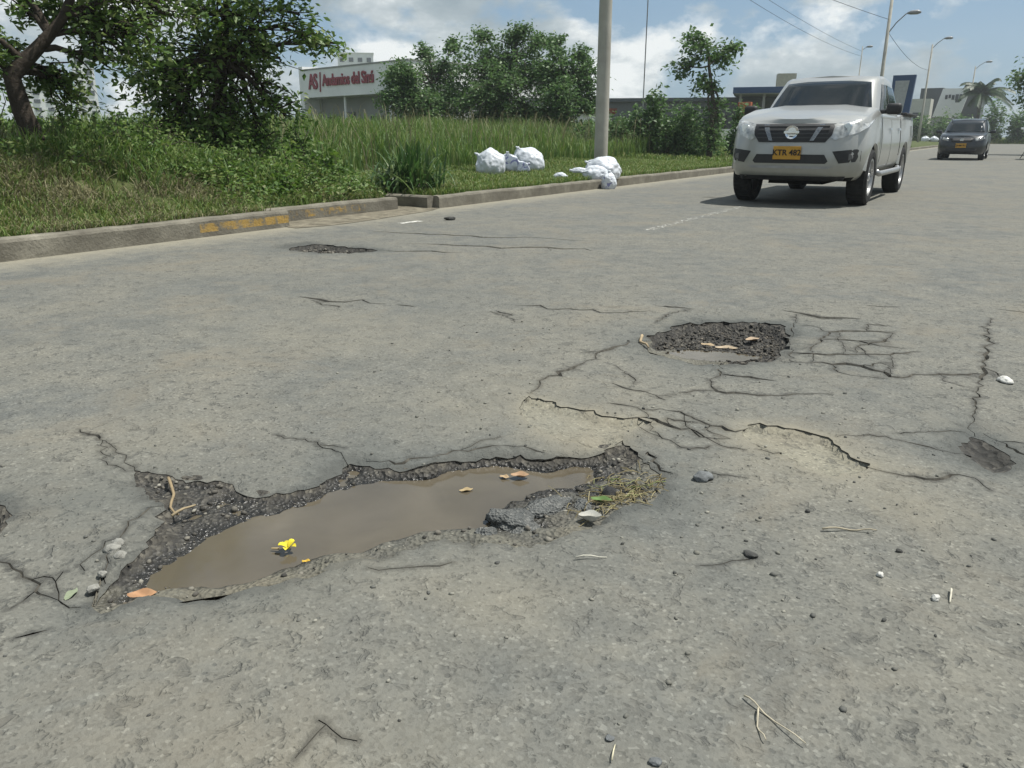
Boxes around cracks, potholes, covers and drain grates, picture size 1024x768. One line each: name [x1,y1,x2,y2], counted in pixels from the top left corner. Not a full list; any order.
pothole [91,443,664,614]
crack [295,724,358,758]
crack [532,305,1024,473]
crack [304,297,413,307]
crack [866,467,990,490]
crack [79,430,135,471]
crack [375,231,588,253]
crack [492,305,690,322]
pothole [643,321,793,365]
pothole [958,437,1016,473]
crack [79,506,160,584]
pothole [289,244,378,254]
